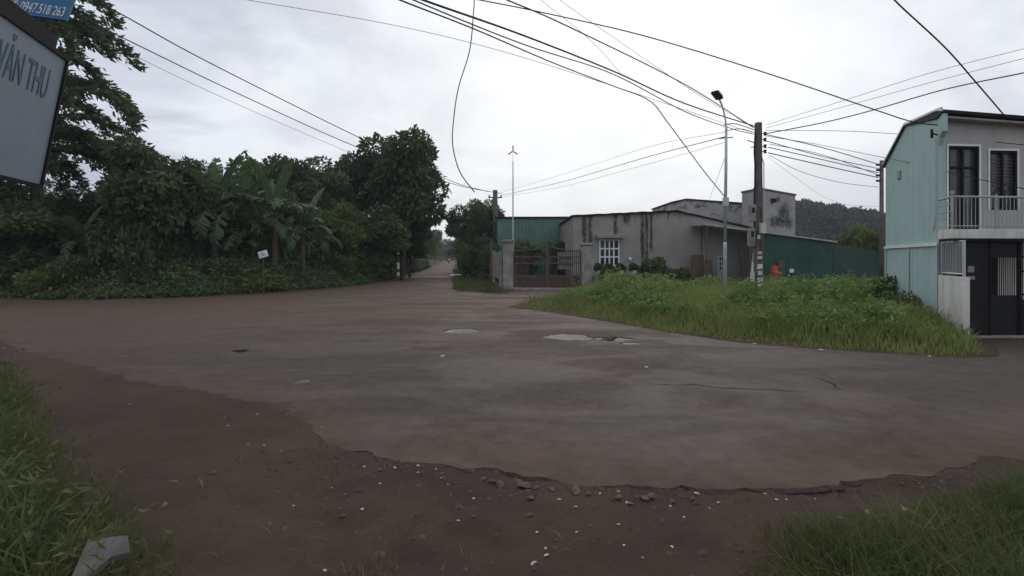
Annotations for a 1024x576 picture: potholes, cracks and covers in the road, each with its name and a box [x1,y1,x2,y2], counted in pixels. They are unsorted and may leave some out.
crack [650,383,800,392]
